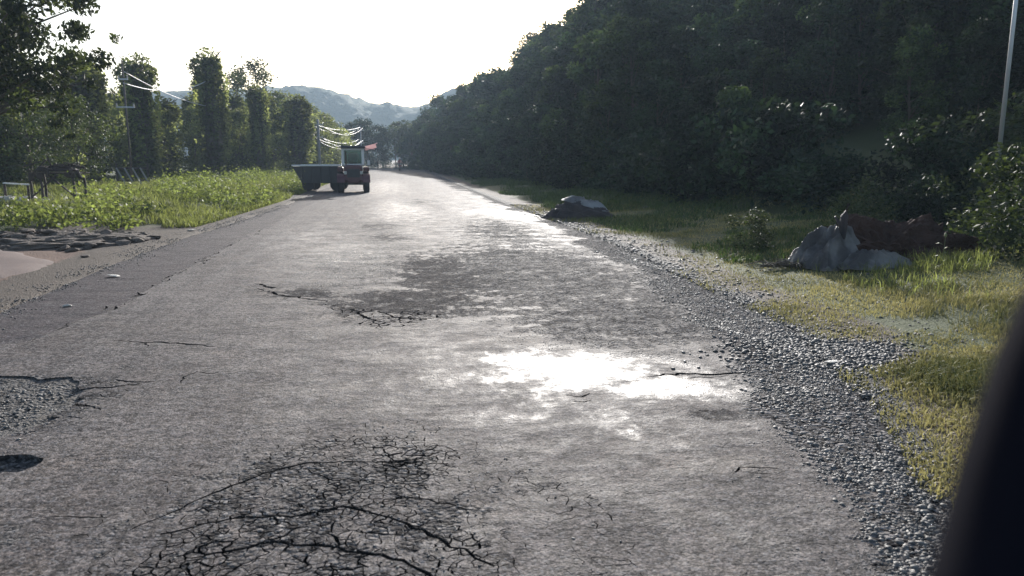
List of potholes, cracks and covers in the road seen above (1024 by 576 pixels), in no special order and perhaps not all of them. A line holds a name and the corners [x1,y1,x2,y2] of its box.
crack [49,419,642,576]
pothole [0,454,43,472]
crack [648,371,751,379]
pothole [0,376,154,437]
